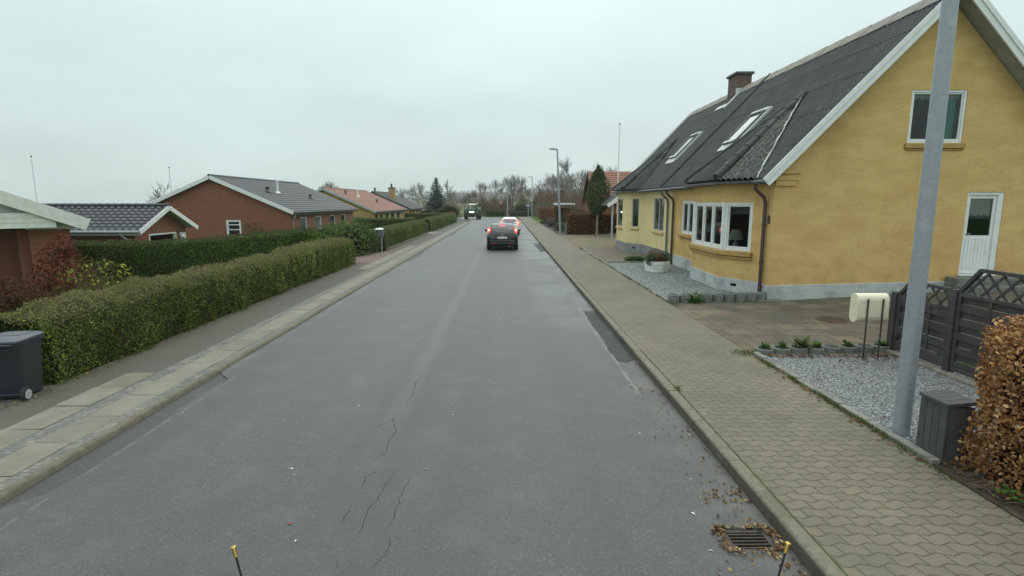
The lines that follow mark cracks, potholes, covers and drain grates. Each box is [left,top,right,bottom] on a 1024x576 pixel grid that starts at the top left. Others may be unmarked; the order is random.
crack [343,361,429,540]
drain grate [718,529,782,551]
